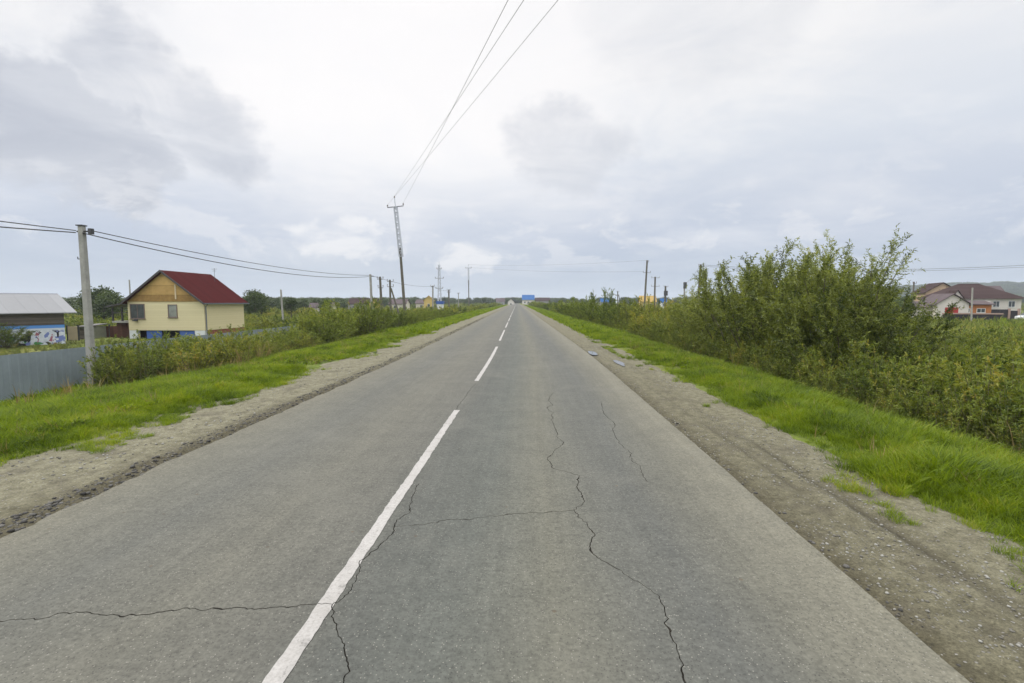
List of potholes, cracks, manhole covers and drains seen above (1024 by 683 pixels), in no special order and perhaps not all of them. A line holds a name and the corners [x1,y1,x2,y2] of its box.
crack [0,484,419,683]
crack [397,393,686,683]
